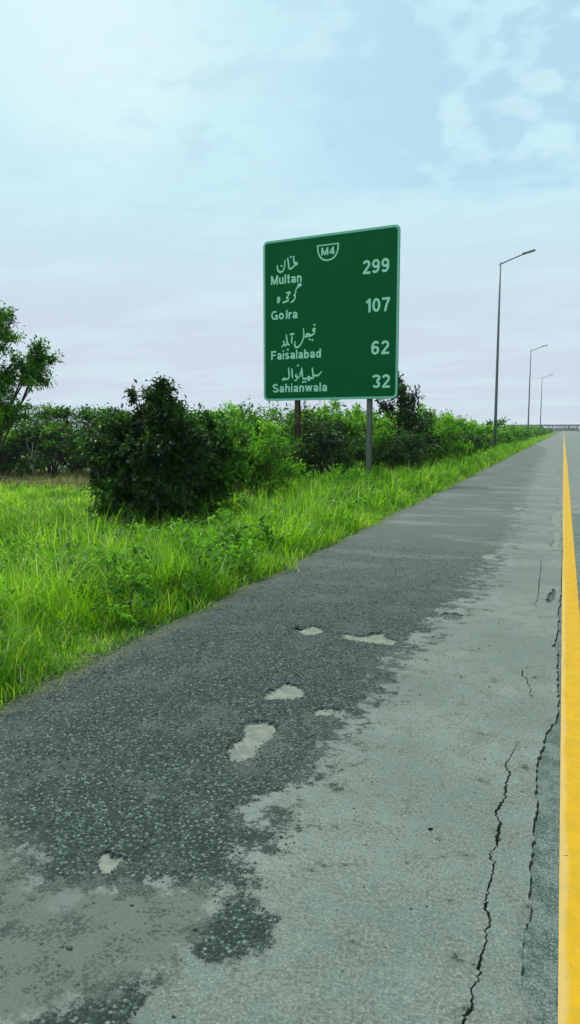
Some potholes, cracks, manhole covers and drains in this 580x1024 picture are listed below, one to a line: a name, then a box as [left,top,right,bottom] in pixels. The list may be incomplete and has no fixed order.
pothole [224,719,279,762]
pothole [292,625,325,635]
crack [461,528,564,1024]
pothole [261,681,307,700]
pothole [338,631,399,645]
pothole [95,849,129,874]
